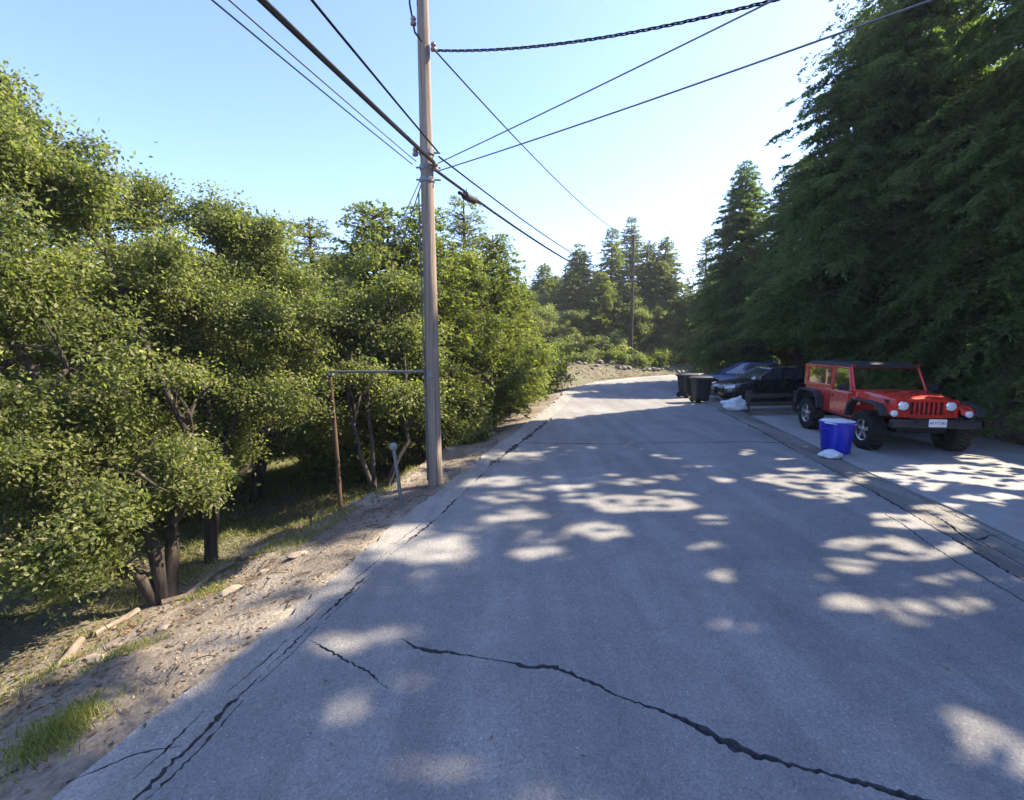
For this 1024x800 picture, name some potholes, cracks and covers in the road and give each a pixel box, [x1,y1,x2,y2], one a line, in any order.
crack [66,416,930,800]
